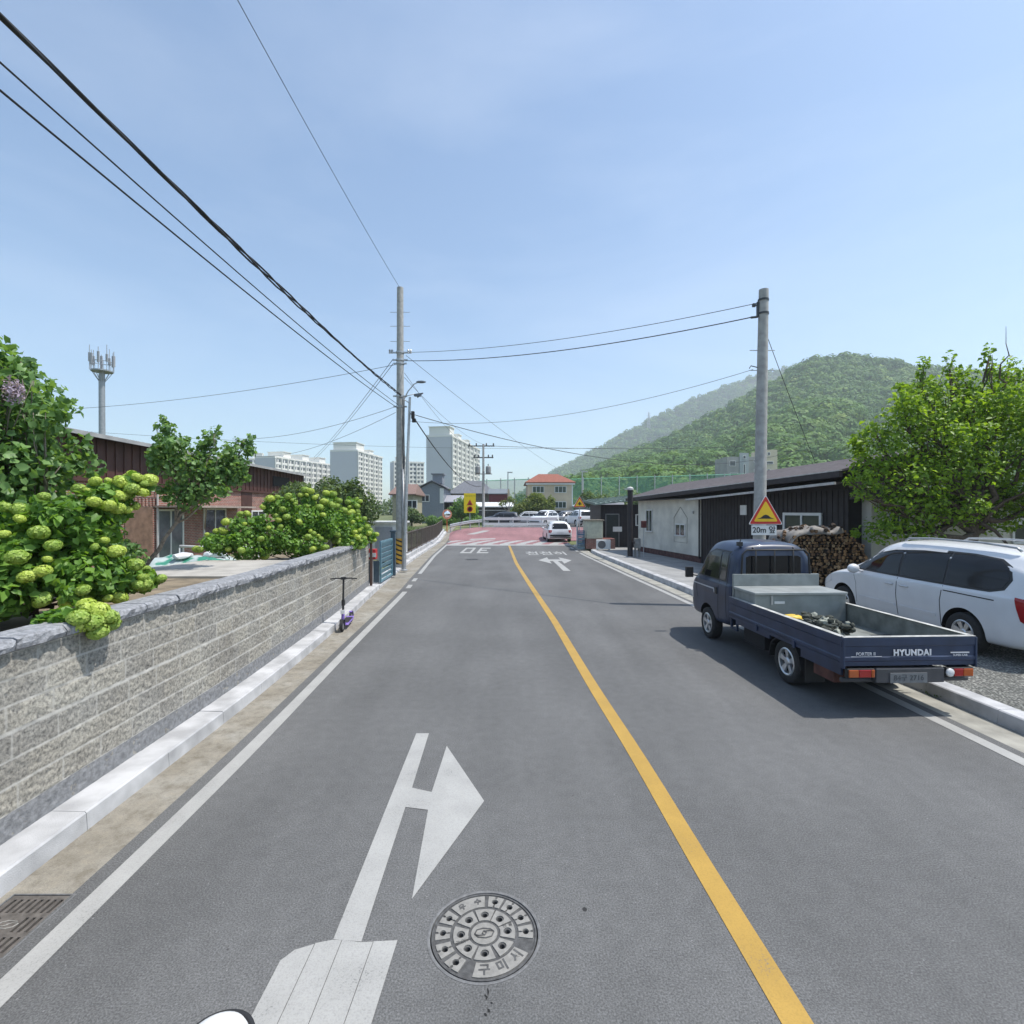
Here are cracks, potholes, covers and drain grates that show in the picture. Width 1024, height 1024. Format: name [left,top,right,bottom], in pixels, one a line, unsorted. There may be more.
manhole cover [427,891,541,986]
drain grate [0,894,76,960]
